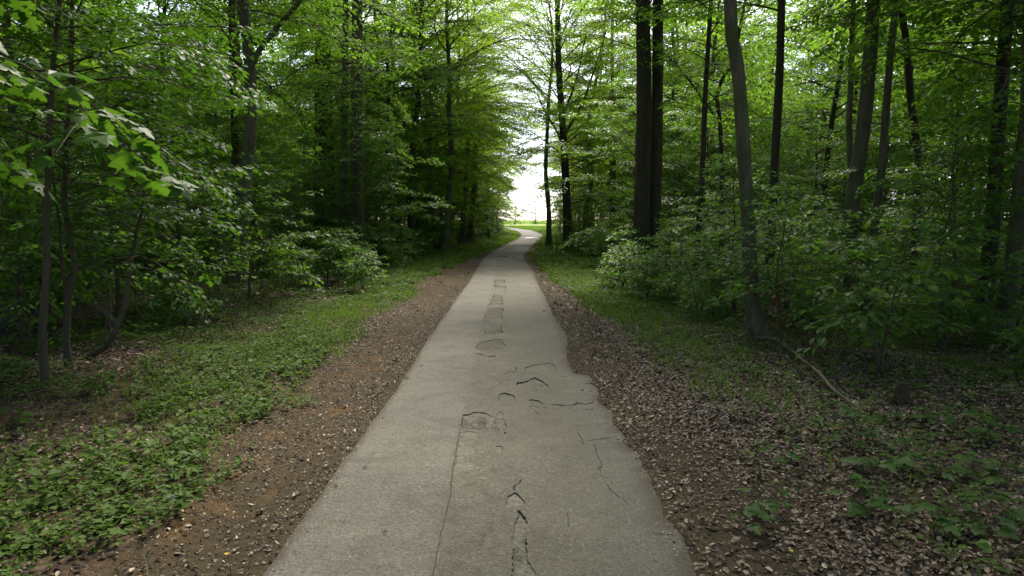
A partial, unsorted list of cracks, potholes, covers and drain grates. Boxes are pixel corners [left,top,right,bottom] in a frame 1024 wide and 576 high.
pothole [498,392,515,402]
pothole [475,339,506,352]
pothole [495,412,509,431]
crack [478,383,630,505]
pothole [460,412,495,431]
